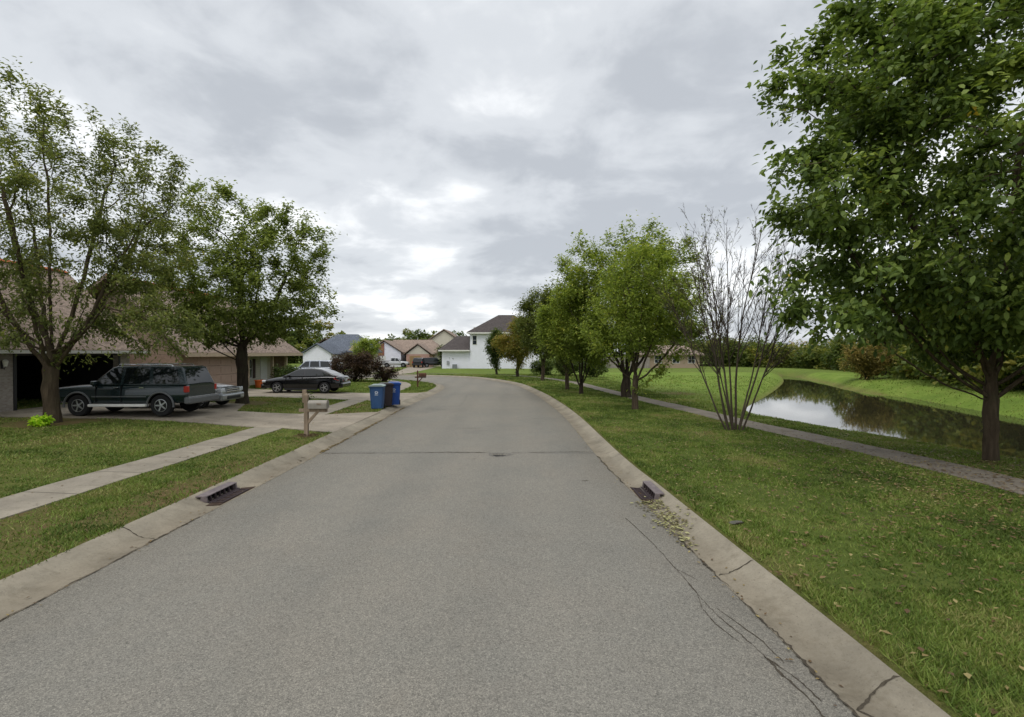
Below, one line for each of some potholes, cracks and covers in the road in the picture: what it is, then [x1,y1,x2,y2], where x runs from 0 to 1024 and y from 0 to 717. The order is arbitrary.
crack [625,518,825,717]
crack [856,675,900,717]
drain grate [630,481,664,504]
drain grate [195,482,256,506]
